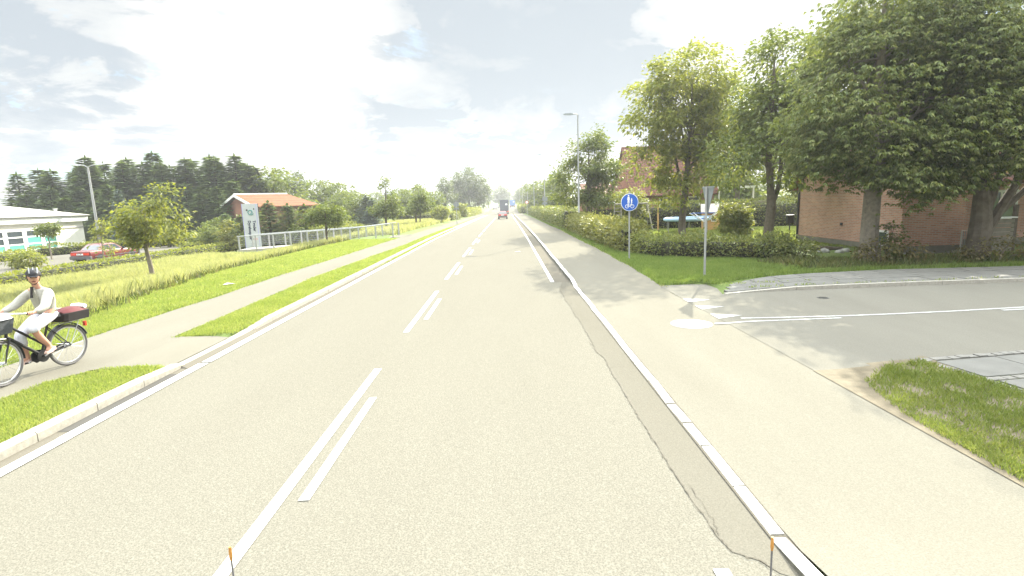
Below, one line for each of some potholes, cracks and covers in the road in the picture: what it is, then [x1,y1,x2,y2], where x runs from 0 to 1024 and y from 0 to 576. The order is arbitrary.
crack [560,284,779,572]
